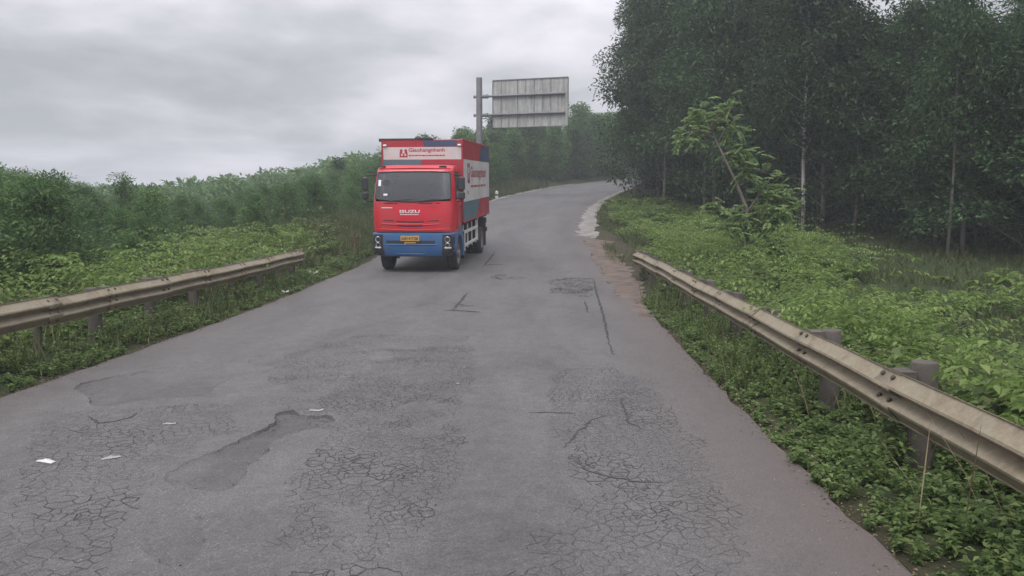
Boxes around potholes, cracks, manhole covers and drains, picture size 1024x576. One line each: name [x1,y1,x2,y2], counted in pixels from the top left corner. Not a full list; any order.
pothole [164,410,335,492]
crack [549,277,614,354]
crack [444,293,477,312]
crack [503,367,751,576]
crack [0,403,241,576]
crack [483,252,525,279]
